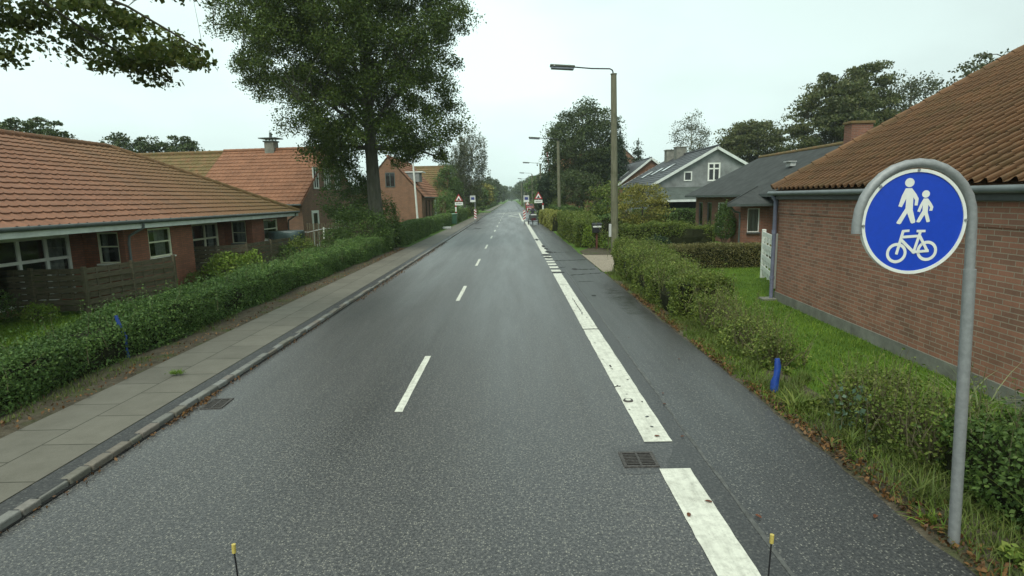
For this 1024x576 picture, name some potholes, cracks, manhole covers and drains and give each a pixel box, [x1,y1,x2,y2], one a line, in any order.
drain grate [199,398,234,410]
drain grate [618,451,660,468]
